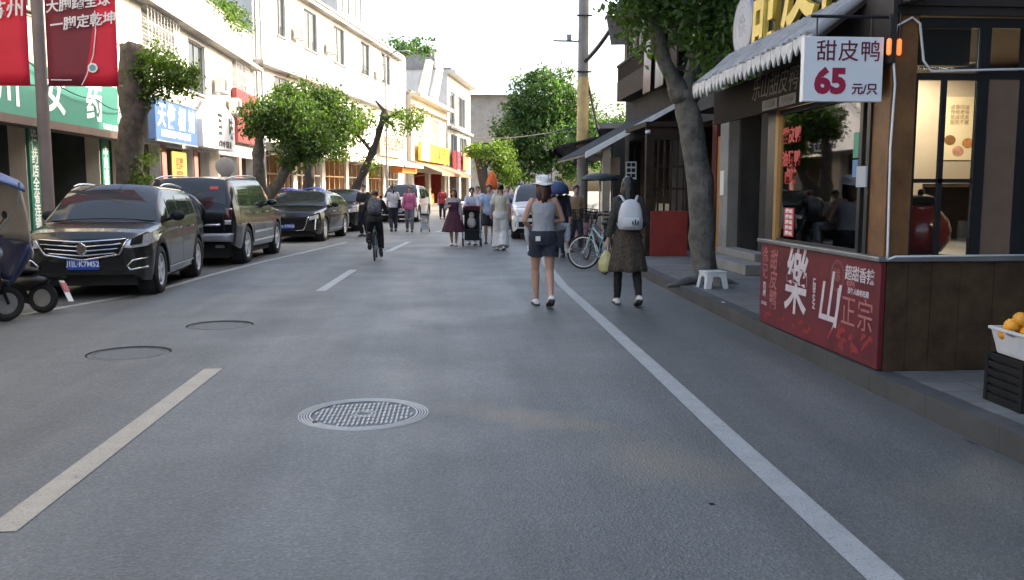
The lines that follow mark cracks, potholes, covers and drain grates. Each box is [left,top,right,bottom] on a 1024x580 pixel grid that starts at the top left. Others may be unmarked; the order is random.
manhole cover [185,320,254,330]
manhole cover [84,346,172,361]
manhole cover [297,398,429,431]
